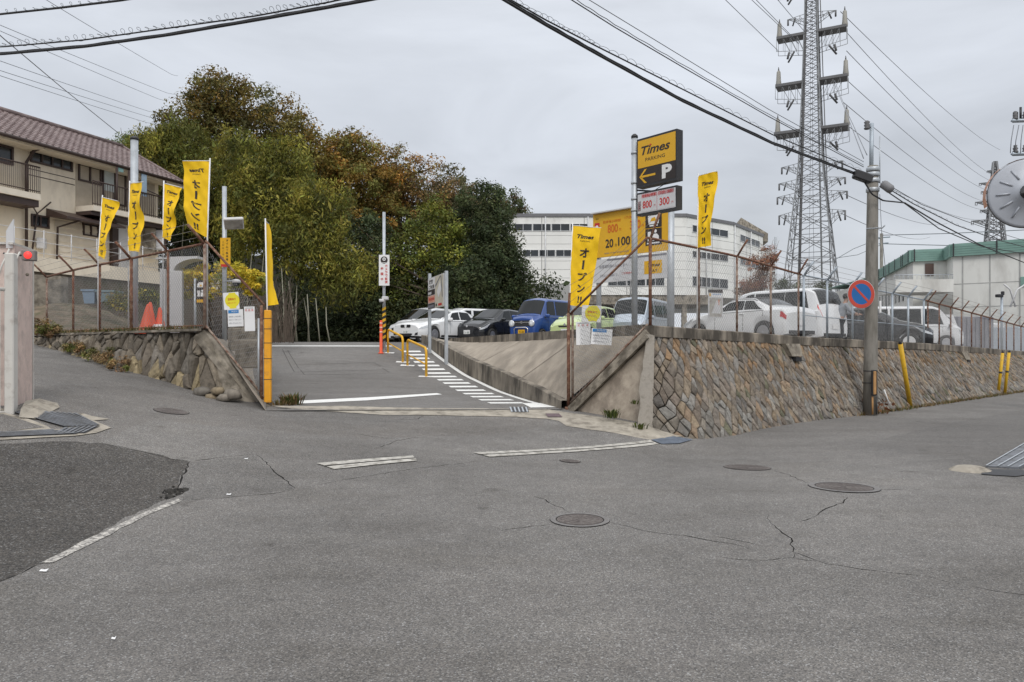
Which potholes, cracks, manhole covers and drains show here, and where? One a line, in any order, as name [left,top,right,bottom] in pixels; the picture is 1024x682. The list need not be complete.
crack [614,499,1024,595]
pothole [159,486,189,500]
drain grate [0,408,111,440]
crack [104,443,295,501]
manhole cover [550,512,610,527]
manhole cover [808,481,881,493]
